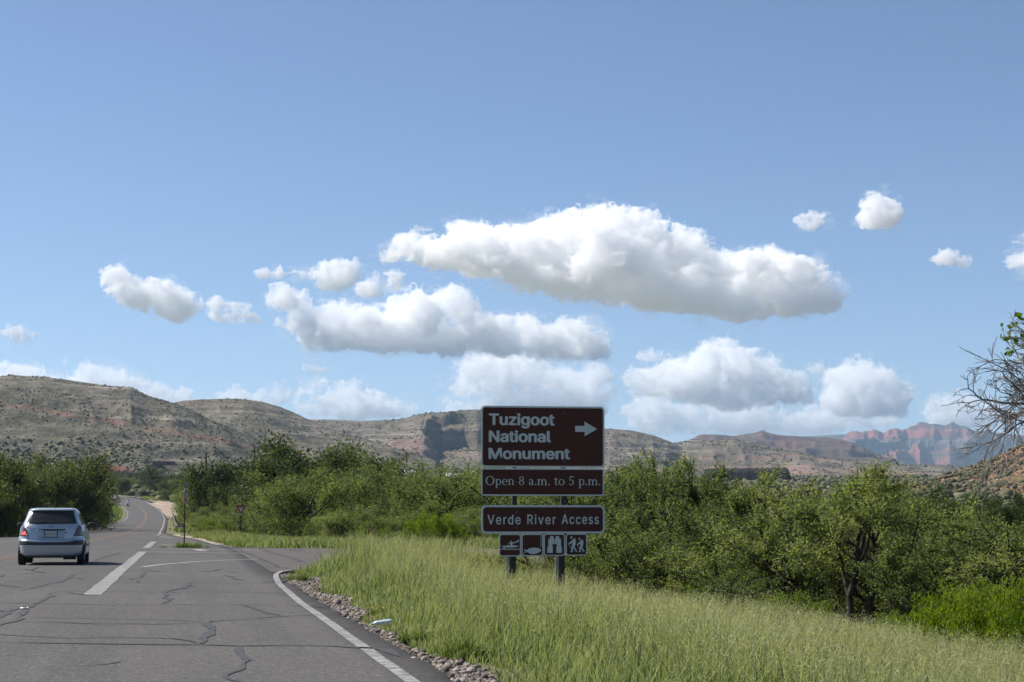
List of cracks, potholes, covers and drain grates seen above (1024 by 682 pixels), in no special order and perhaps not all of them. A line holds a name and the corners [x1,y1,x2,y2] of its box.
crack [0,556,400,666]
